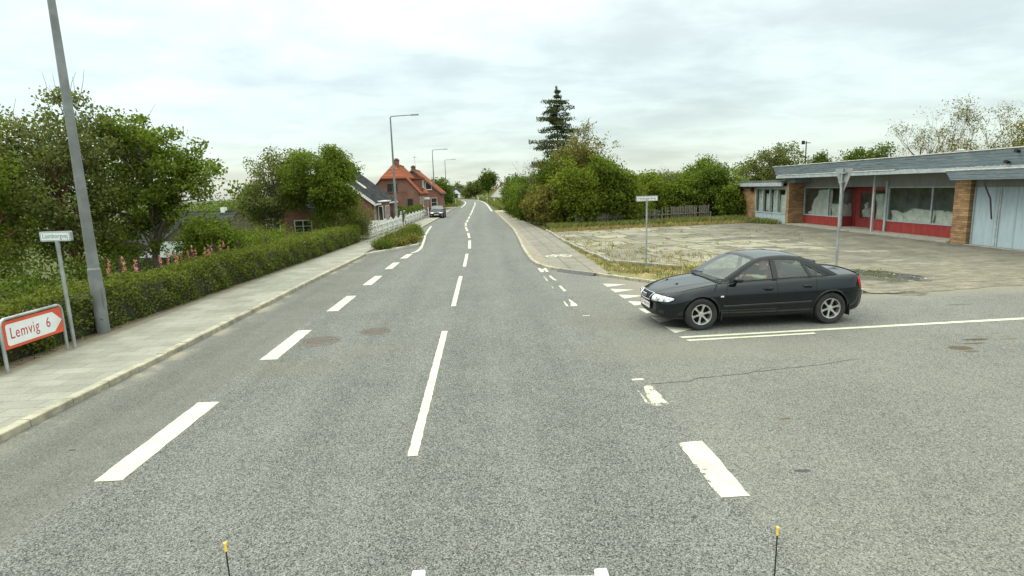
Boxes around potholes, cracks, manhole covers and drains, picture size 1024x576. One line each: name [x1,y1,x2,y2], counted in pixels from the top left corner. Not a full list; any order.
manhole cover [299,336,340,347]
manhole cover [360,327,391,335]
crack [652,358,860,384]
